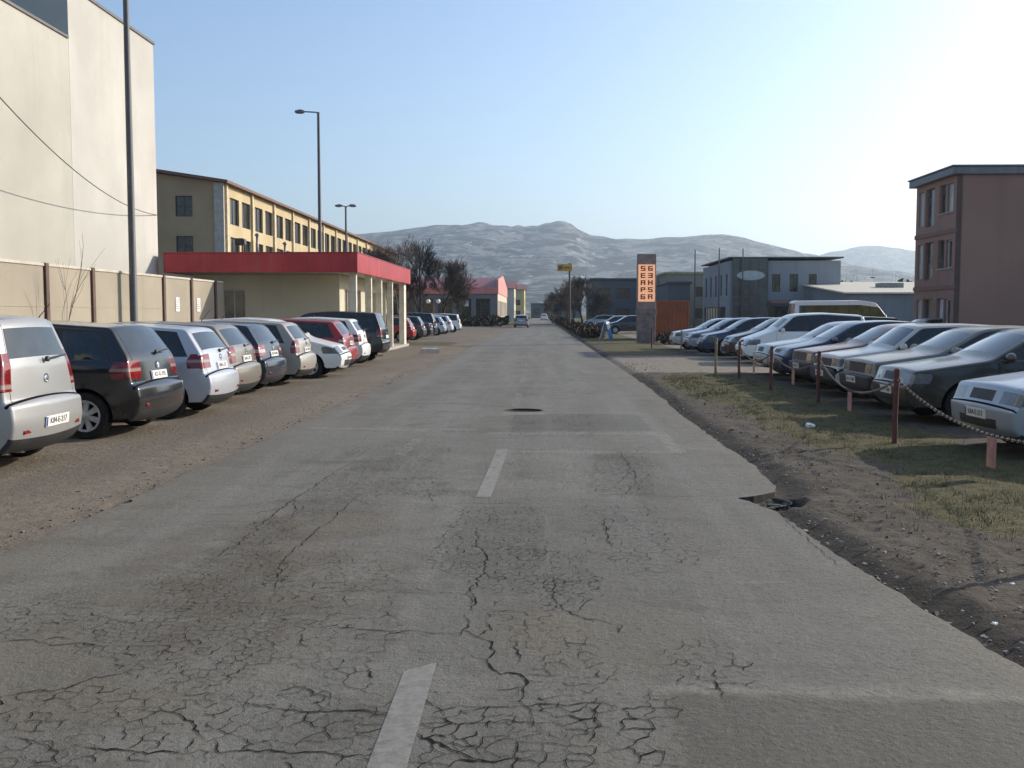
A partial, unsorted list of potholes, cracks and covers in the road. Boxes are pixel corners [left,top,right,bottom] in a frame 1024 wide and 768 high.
pothole [757,497,793,511]
crack [508,414,700,576]
crack [656,641,762,697]
crack [0,440,683,768]
